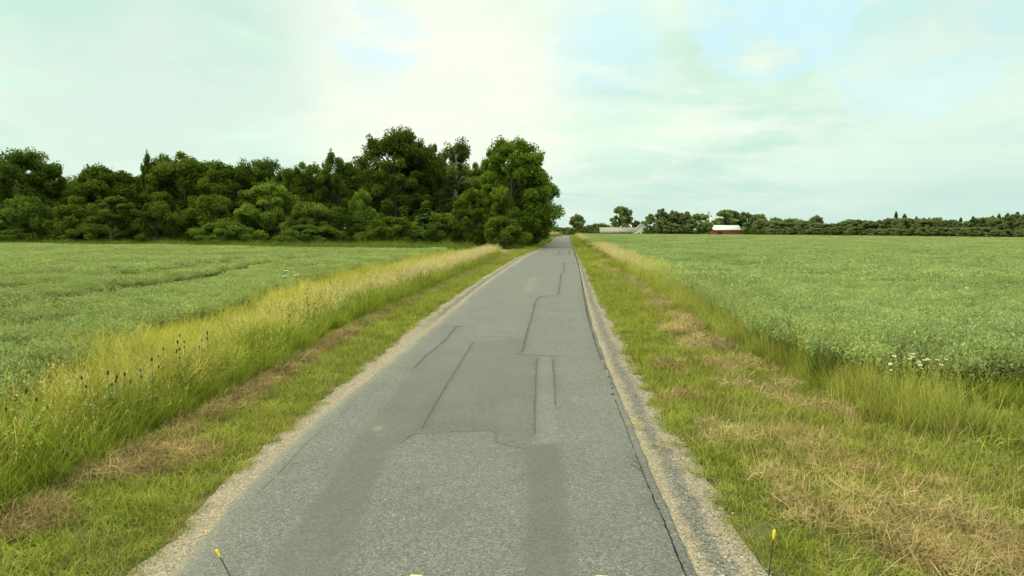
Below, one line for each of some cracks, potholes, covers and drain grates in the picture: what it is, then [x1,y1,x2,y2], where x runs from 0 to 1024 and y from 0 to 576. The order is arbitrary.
crack [401,342,523,449]
crack [557,251,687,576]
